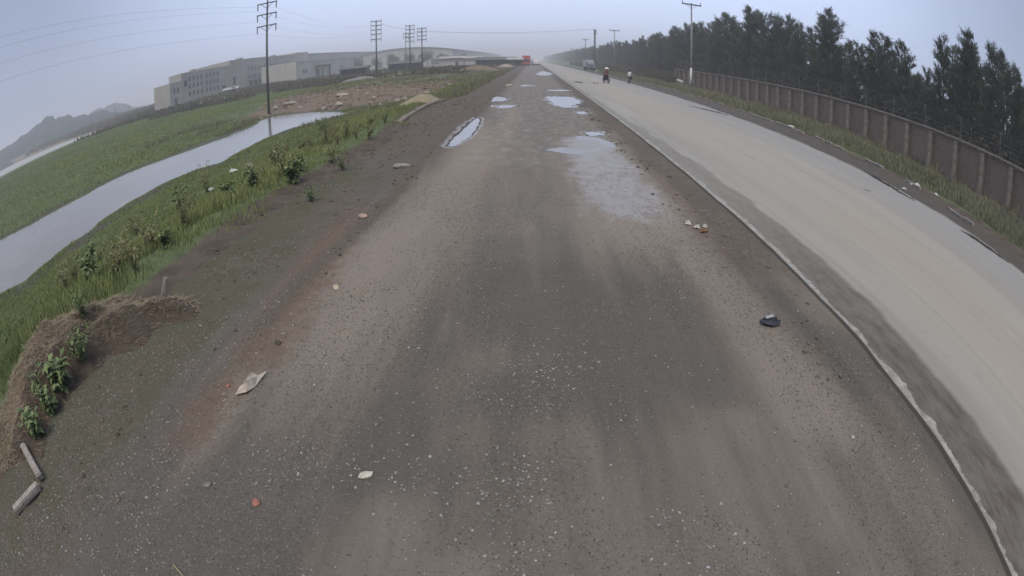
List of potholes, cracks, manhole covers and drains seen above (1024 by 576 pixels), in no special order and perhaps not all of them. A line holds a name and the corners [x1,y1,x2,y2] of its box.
pothole [543,96,583,108]
pothole [445,117,482,147]
